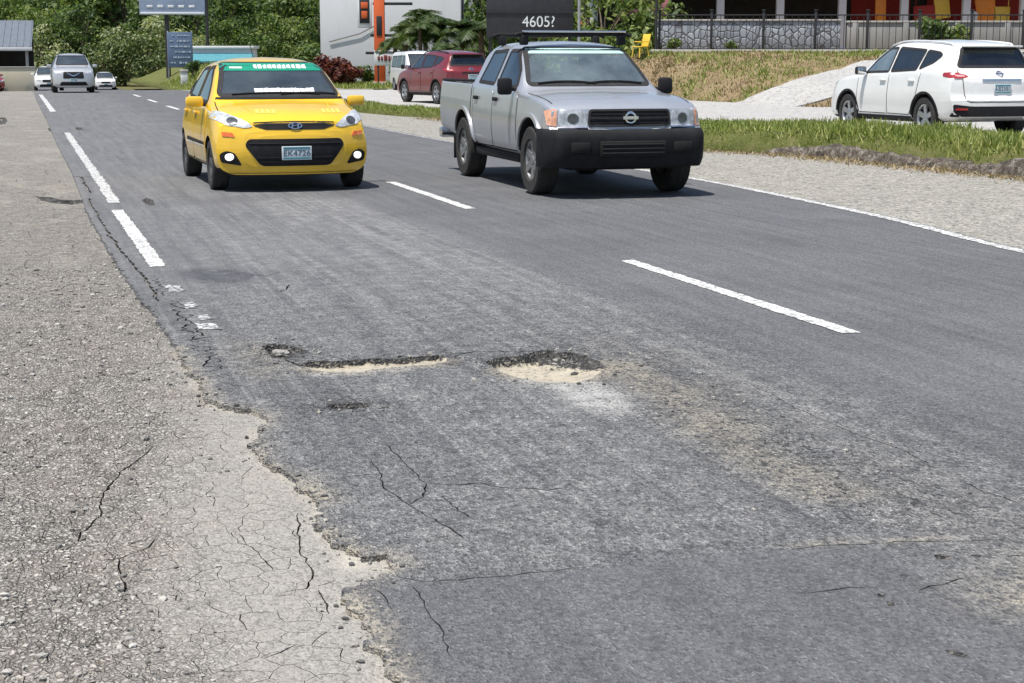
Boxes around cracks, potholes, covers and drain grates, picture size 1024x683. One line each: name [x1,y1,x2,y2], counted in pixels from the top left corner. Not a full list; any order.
pothole [298,355,447,372]
pothole [486,350,606,383]
pothole [262,344,310,360]
crack [0,158,351,683]
crack [371,444,568,538]
crack [413,587,451,657]
